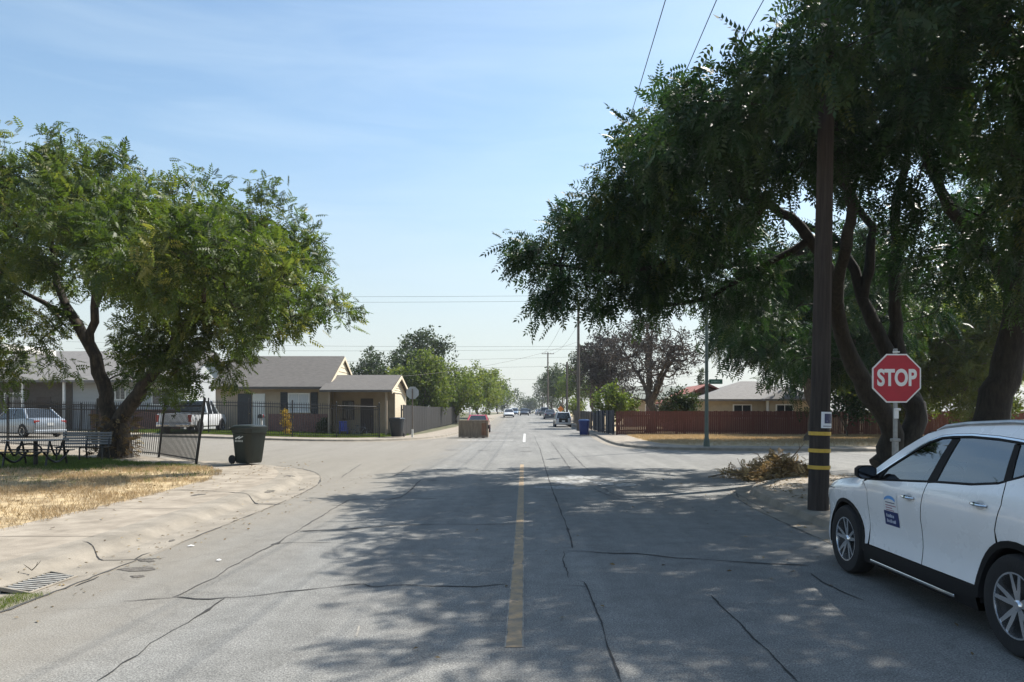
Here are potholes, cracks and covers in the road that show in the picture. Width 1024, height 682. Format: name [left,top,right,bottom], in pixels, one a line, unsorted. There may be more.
drain grate [0,570,78,594]
crack [590,551,863,682]
crack [76,541,166,586]
crack [562,553,621,680]
crack [97,583,498,681]
